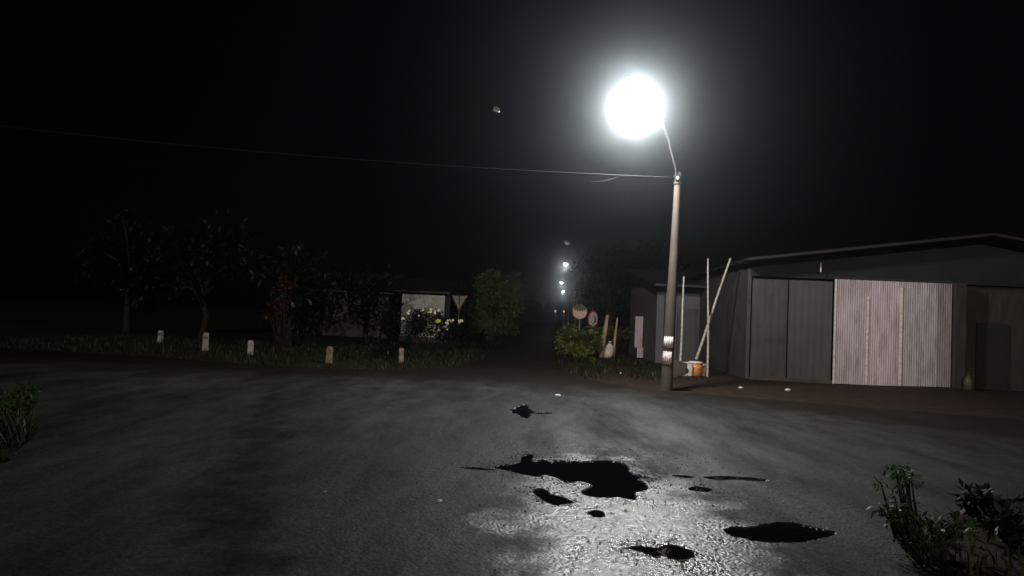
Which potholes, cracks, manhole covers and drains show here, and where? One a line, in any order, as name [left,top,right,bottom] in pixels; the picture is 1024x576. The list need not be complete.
pothole [625,544,695,560]
pothole [587,510,606,518]
pothole [491,454,651,500]
pothole [723,522,837,543]
pothole [509,404,552,418]
pothole [532,488,573,506]
